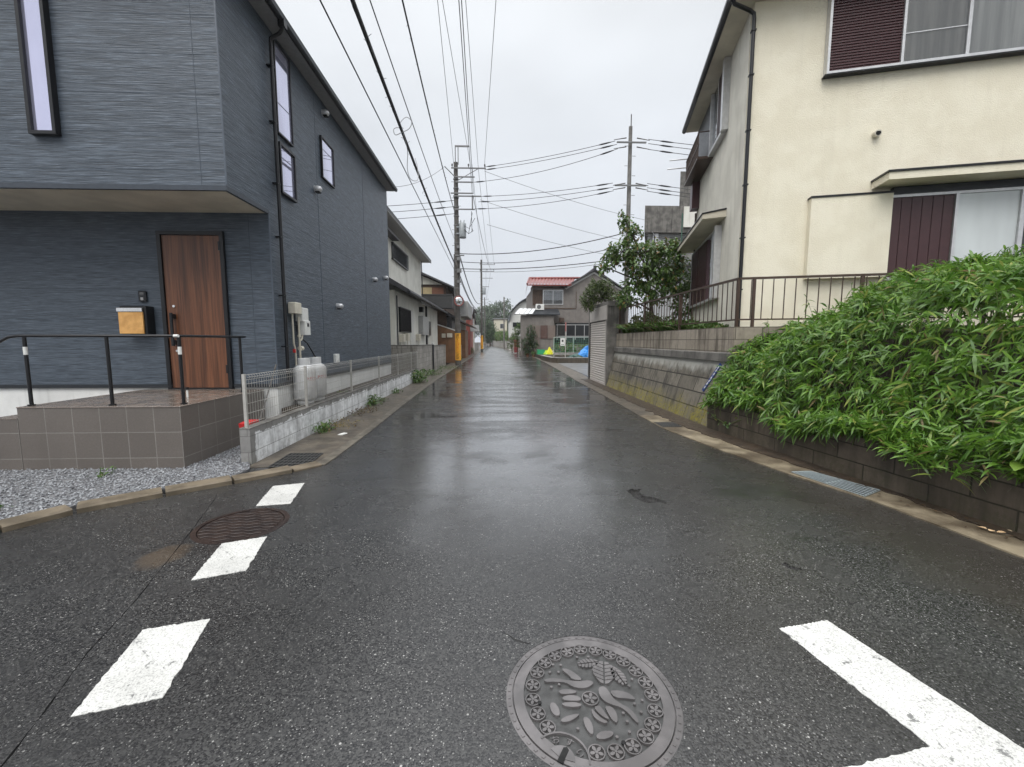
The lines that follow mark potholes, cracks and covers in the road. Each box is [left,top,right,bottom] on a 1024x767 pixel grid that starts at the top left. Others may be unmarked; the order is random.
manhole cover [190,508,290,545]
manhole cover [506,636,684,767]
drain grate [792,471,881,497]
drain grate [268,453,323,467]
pothole [626,489,666,503]
